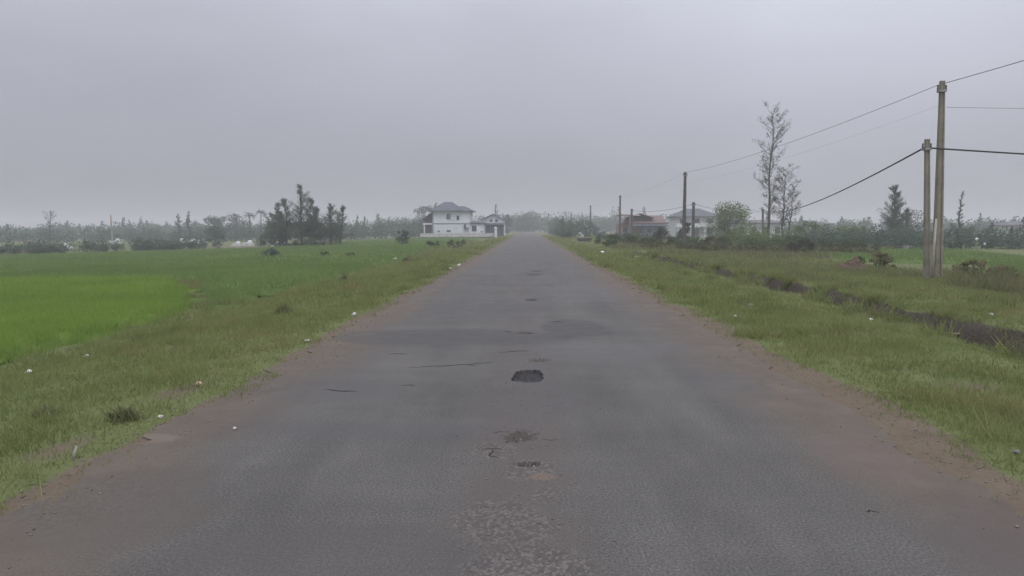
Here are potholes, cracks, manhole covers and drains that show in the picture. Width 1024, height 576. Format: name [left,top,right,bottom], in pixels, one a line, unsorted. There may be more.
pothole [498,428,541,444]
pothole [511,370,544,382]
